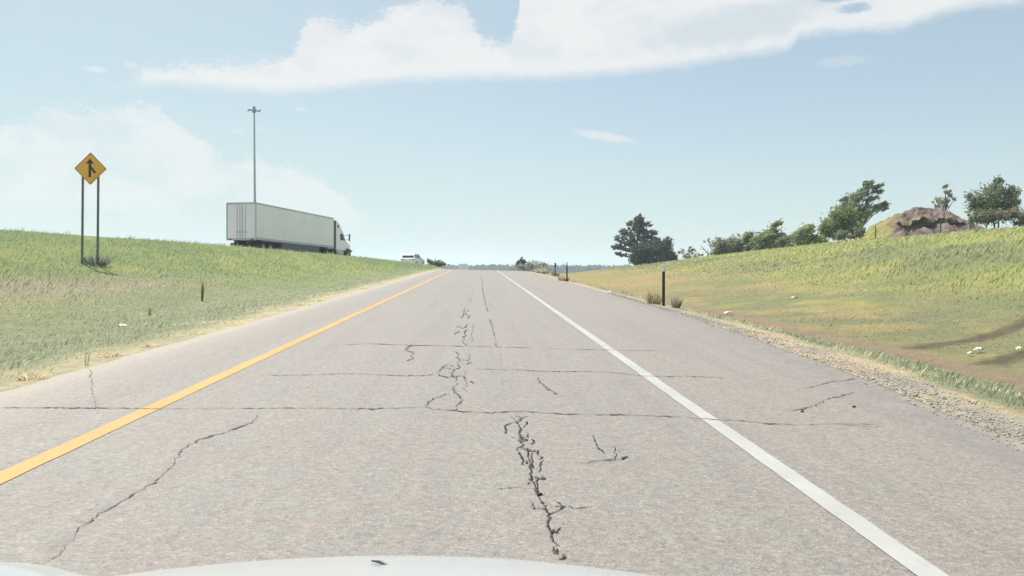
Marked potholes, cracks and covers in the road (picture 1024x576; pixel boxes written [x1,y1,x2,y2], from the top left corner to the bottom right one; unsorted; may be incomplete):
crack [6,278,873,560]
